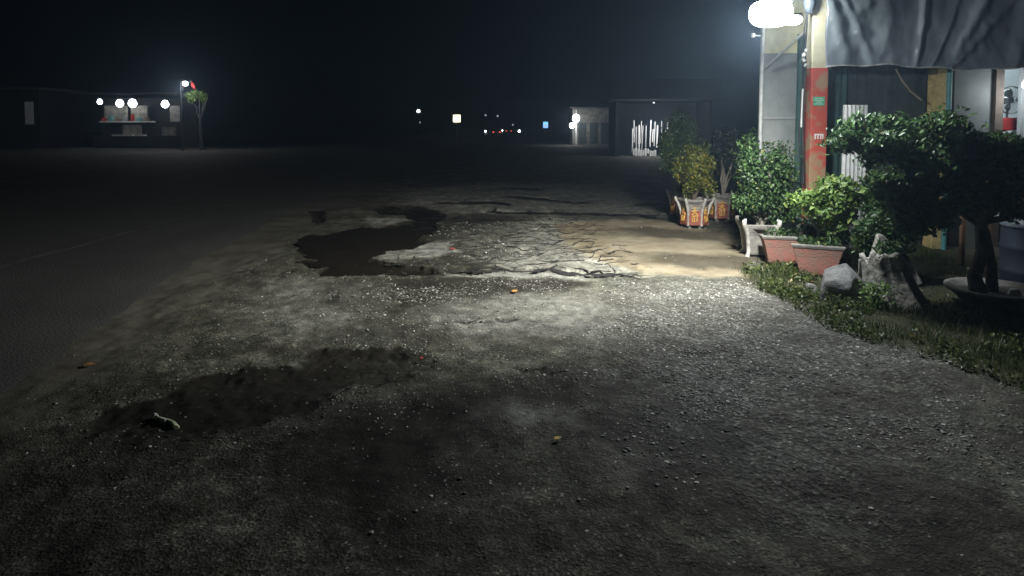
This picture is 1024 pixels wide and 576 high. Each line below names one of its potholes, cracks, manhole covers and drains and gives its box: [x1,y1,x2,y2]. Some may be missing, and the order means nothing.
pothole [80,345,434,446]
crack [384,187,678,280]
pothole [290,205,446,277]
